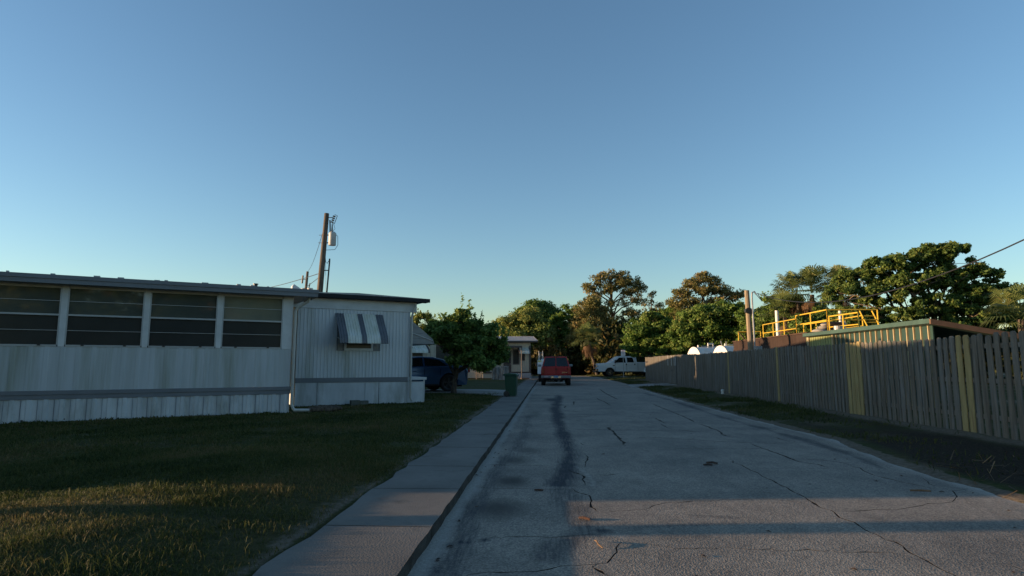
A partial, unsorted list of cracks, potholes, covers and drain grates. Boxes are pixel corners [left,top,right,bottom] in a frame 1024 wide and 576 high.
crack [612,459,969,576]
crack [482,390,828,510]
crack [467,534,622,576]
